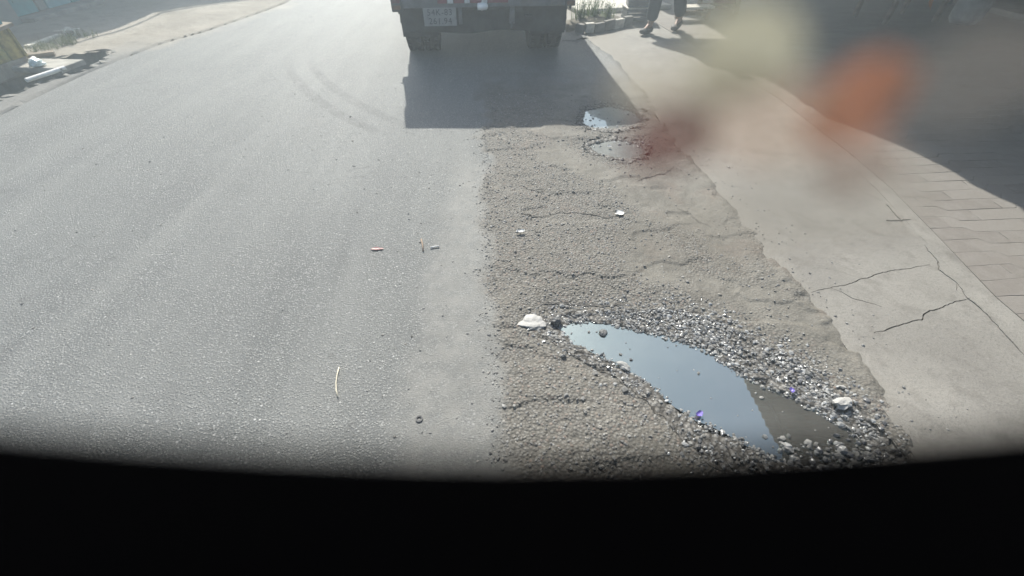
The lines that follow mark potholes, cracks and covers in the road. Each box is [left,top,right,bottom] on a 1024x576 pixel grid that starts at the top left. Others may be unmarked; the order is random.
pothole [581,134,629,163]
crack [520,186,616,218]
pothole [540,307,892,450]
pothole [575,102,643,133]
